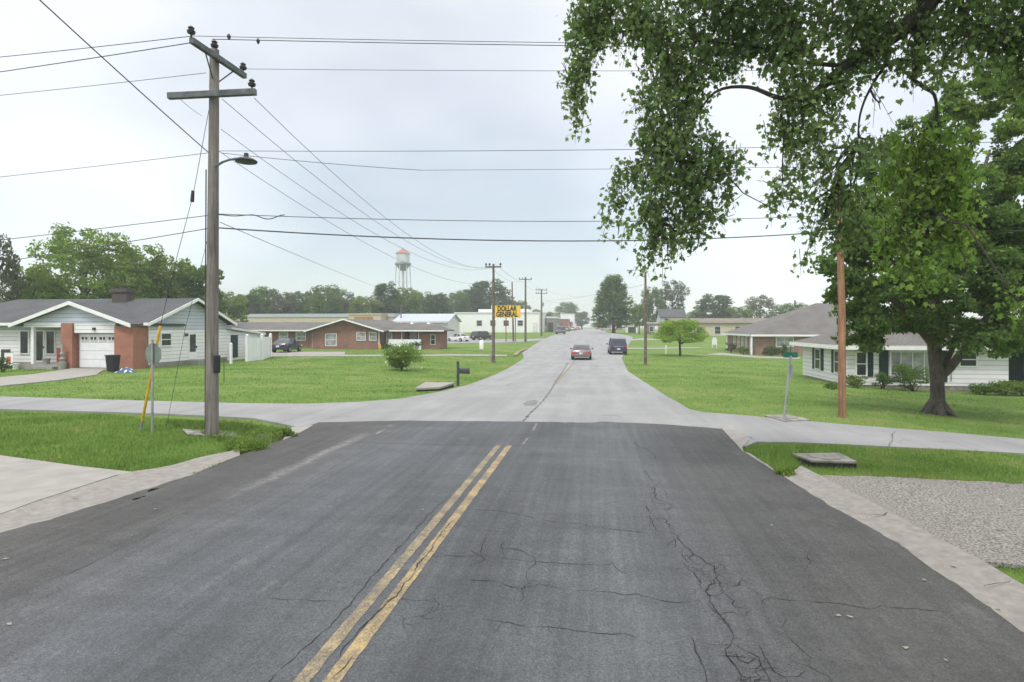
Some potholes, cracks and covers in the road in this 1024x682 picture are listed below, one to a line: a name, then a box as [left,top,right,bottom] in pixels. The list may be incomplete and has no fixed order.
crack [268,472,946,682]
